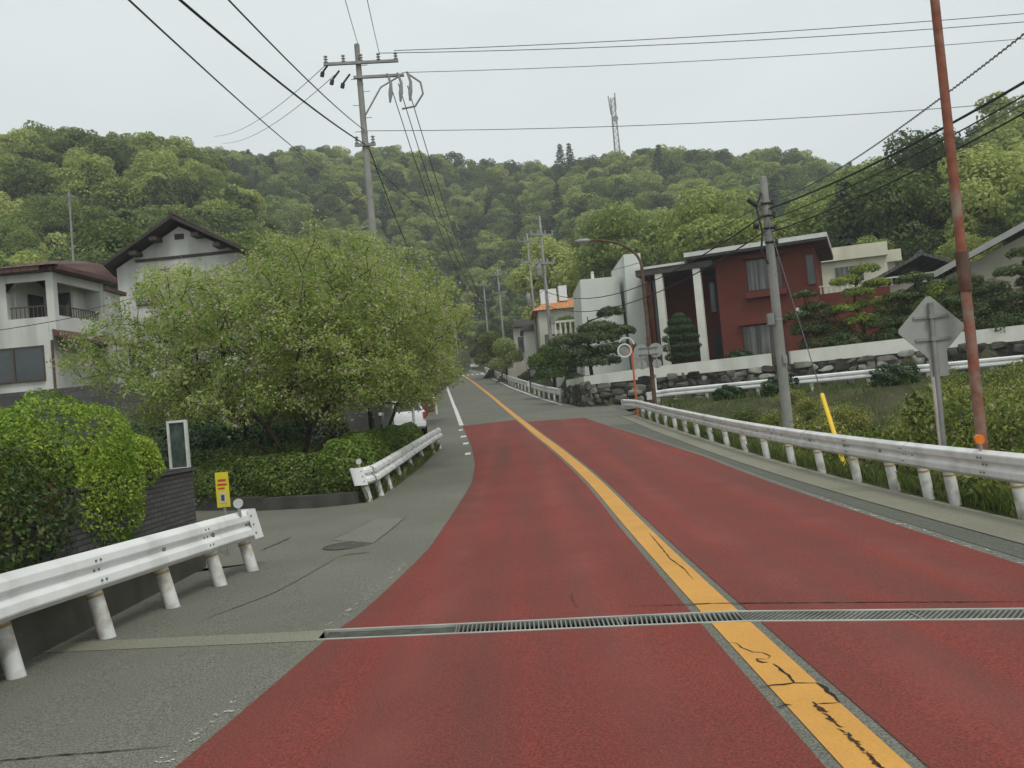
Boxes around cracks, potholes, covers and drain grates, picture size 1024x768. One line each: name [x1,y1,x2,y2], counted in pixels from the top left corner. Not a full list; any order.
crack [4,745,172,760]
manhole cover [323,541,373,550]
drain grate [316,608,1024,641]
crack [732,642,885,768]
